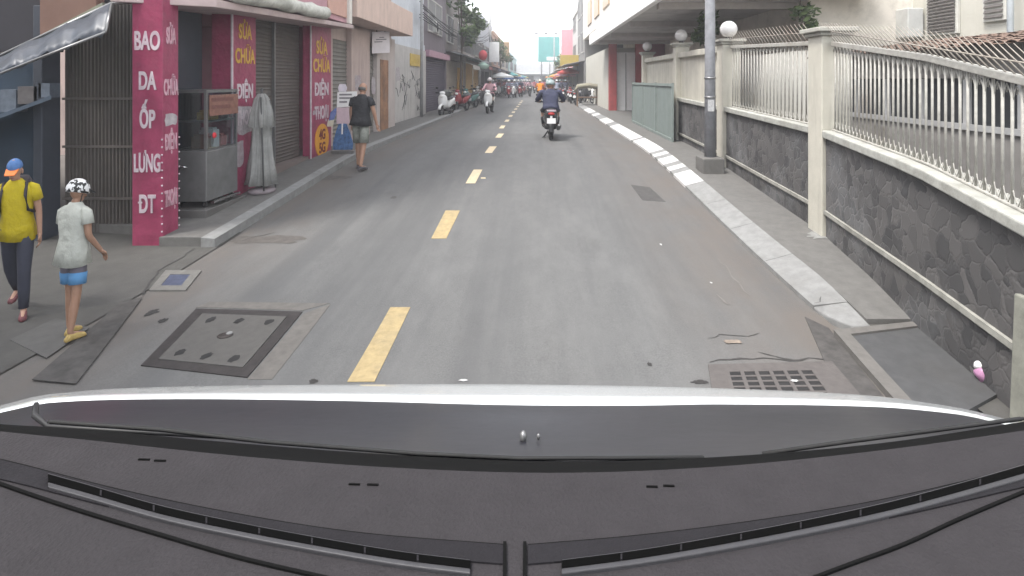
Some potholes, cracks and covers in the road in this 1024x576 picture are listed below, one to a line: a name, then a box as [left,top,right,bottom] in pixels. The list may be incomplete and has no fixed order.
crack [710,333,824,362]
drain grate [708,361,861,395]
manhole cover [149,270,202,292]
manhole cover [141,308,302,378]
